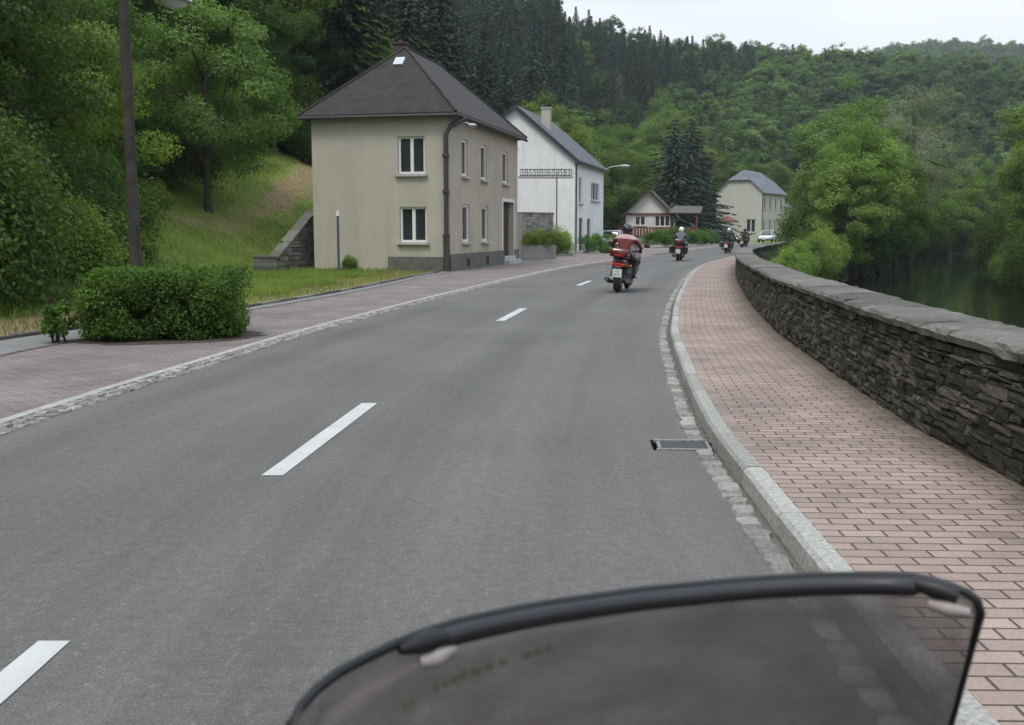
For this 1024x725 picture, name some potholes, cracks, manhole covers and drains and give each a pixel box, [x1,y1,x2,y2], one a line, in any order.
drain grate [650,439,714,453]
